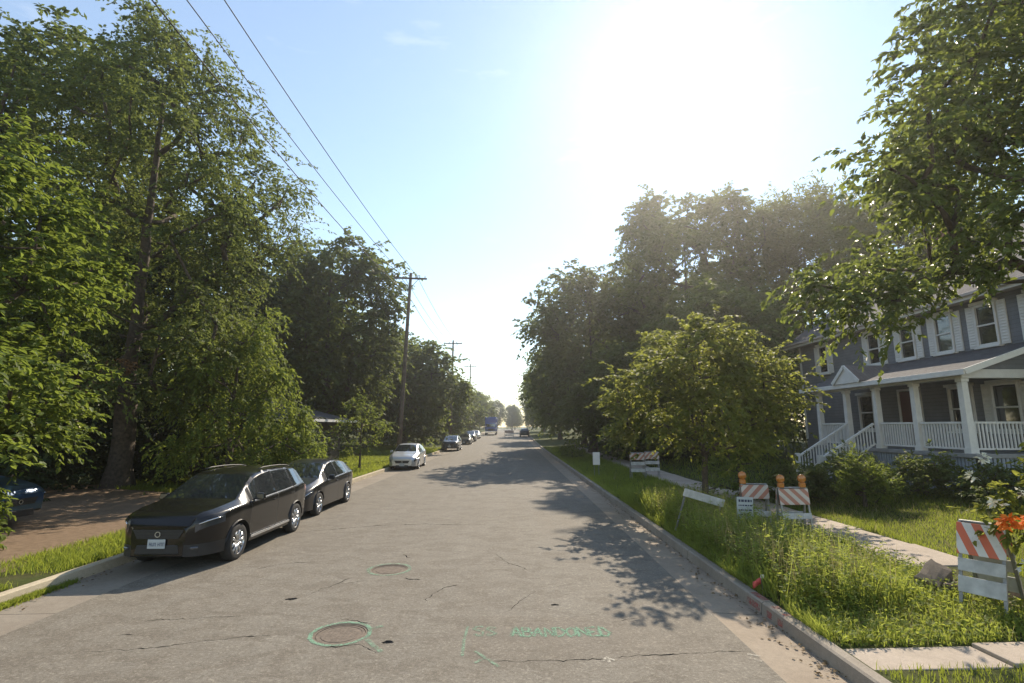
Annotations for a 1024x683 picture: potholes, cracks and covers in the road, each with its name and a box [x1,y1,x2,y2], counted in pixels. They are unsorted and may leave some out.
crack [503,651,745,662]
manhole cover [371,565,408,574]
manhole cover [313,624,368,645]
crack [90,634,268,652]
